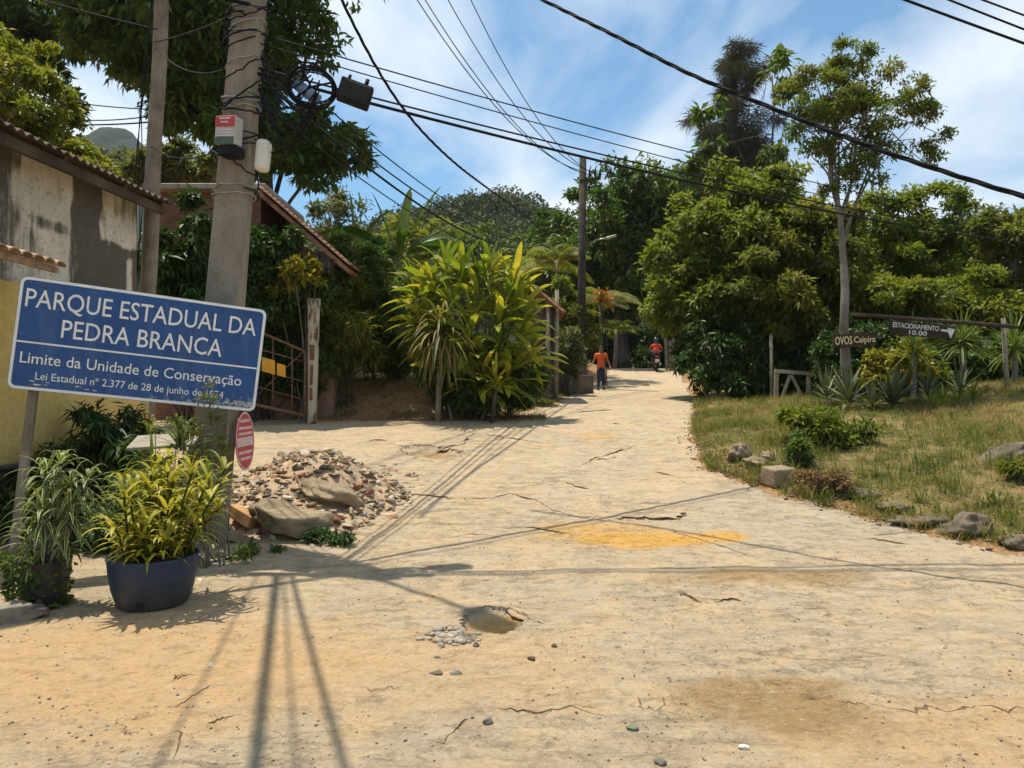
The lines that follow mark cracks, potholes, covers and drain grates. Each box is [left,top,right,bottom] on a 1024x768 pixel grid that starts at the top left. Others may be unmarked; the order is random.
crack [493,695,670,721]
pothole [447,605,540,641]
crack [830,695,1024,716]
pothole [396,444,469,462]
crack [362,683,403,694]
crack [117,670,238,768]
crack [406,445,757,558]
crack [681,594,749,605]
crack [432,716,473,745]
